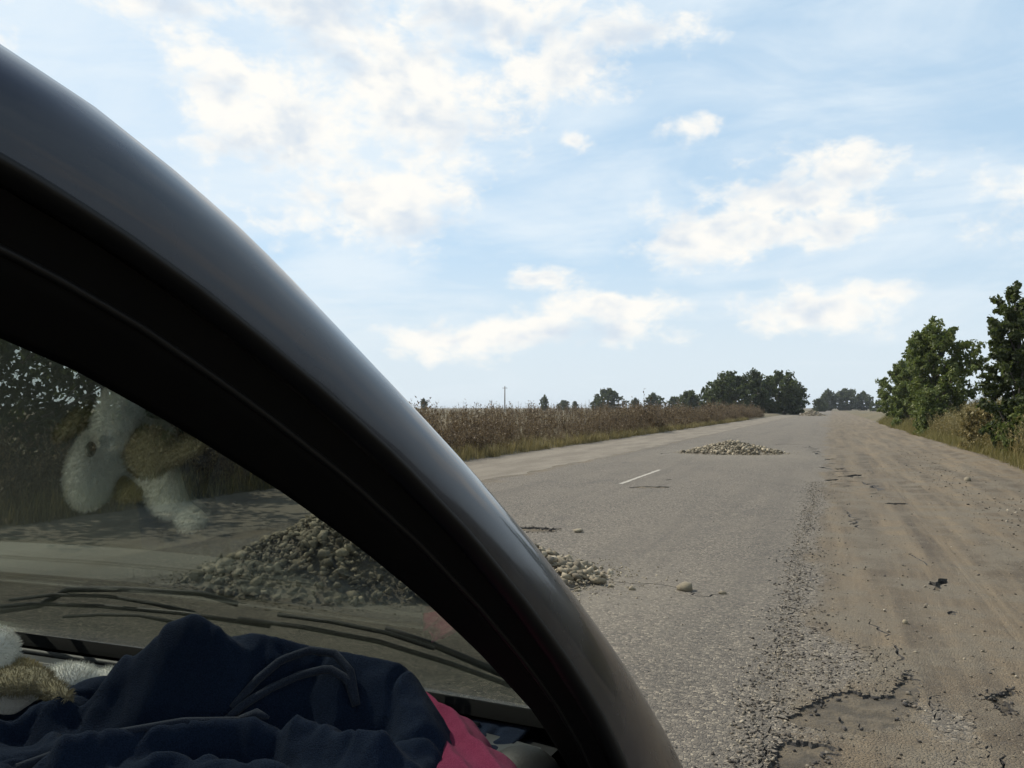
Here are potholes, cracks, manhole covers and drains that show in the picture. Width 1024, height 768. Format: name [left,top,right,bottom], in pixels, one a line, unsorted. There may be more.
pothole [972,685,1020,717]
crack [737,490,905,768]
pothole [775,669,922,736]
crack [775,444,884,494]
pothole [760,732,842,768]
